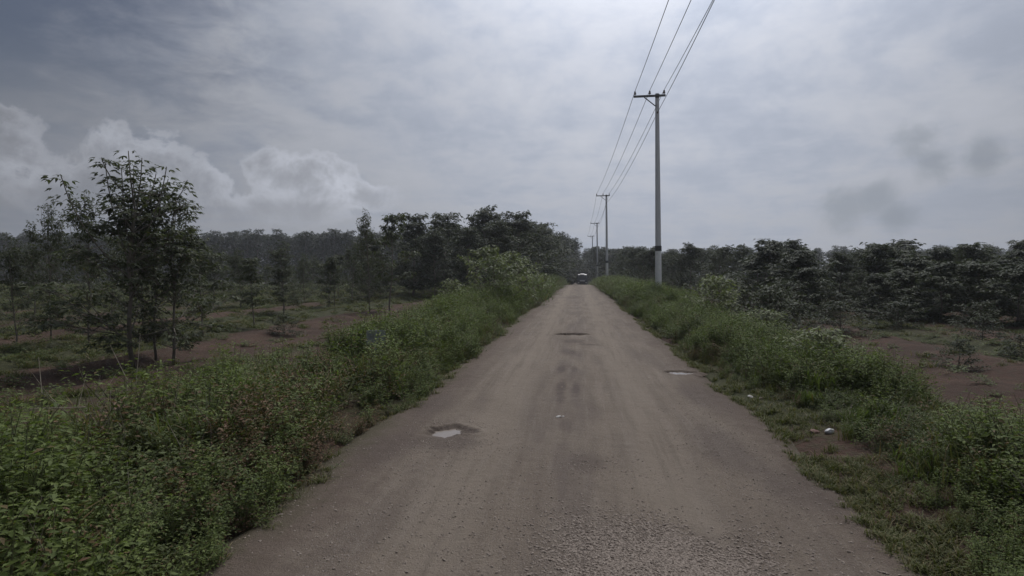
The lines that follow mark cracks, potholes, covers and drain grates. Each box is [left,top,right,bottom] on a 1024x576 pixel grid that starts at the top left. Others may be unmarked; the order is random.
pothole [658,370,708,378]
pothole [405,422,491,442]
